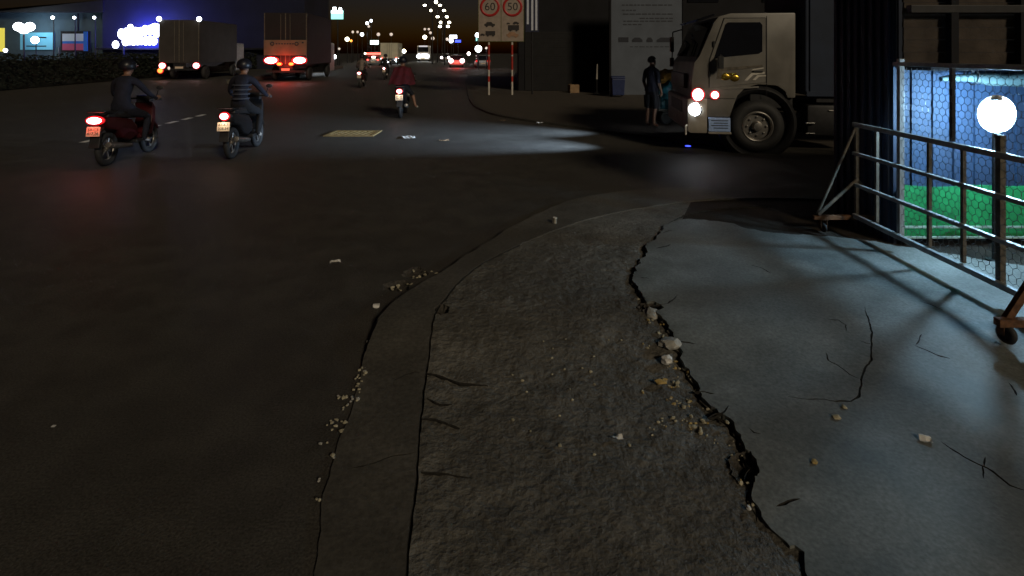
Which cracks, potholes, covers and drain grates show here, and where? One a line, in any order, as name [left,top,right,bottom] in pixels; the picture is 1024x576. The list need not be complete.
crack [794,311,873,402]
crack [628,206,768,521]
crack [347,452,415,469]
crack [776,499,798,507]
crack [942,442,1023,490]
